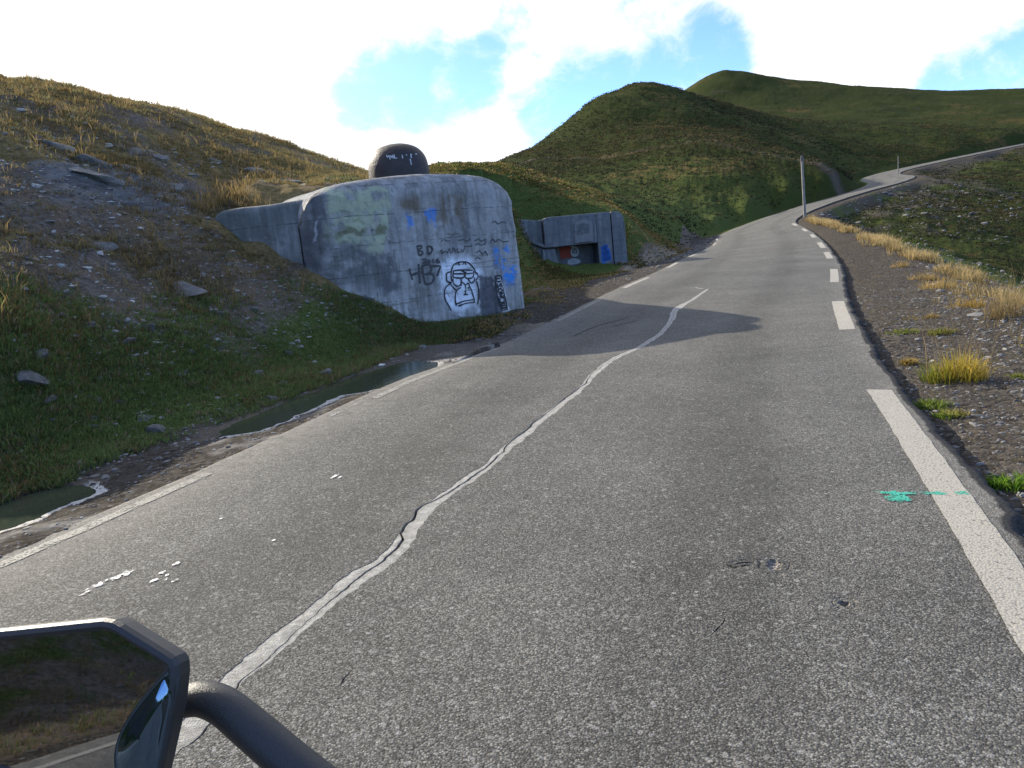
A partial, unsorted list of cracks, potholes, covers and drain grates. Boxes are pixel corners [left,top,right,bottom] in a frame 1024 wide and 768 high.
pothole [832,598,855,609]
pothole [727,556,807,575]
crack [175,287,743,756]
